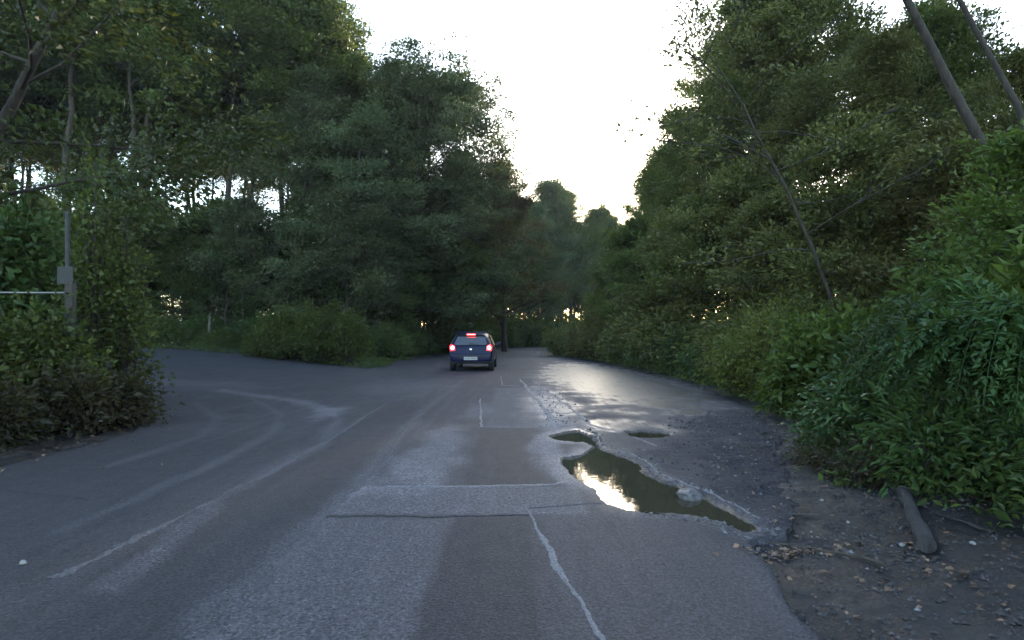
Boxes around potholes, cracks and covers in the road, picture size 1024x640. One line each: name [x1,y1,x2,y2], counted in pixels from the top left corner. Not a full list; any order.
pothole [548,429,762,532]
